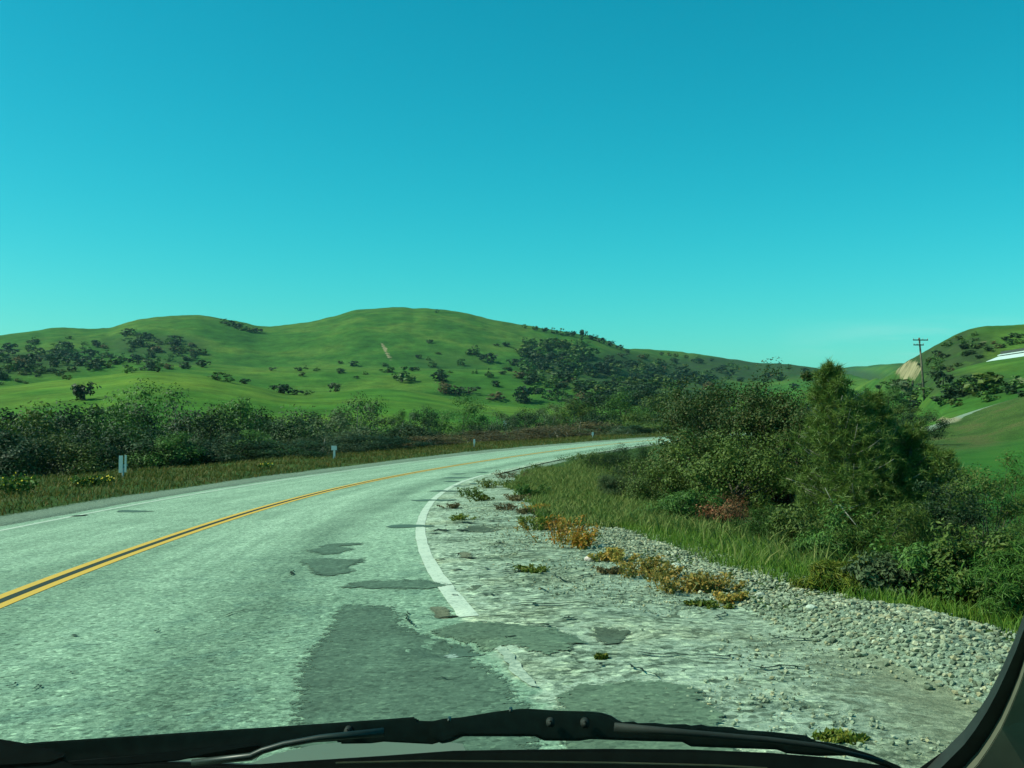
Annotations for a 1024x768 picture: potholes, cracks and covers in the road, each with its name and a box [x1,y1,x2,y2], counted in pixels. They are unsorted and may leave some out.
crack [623,651,731,676]
